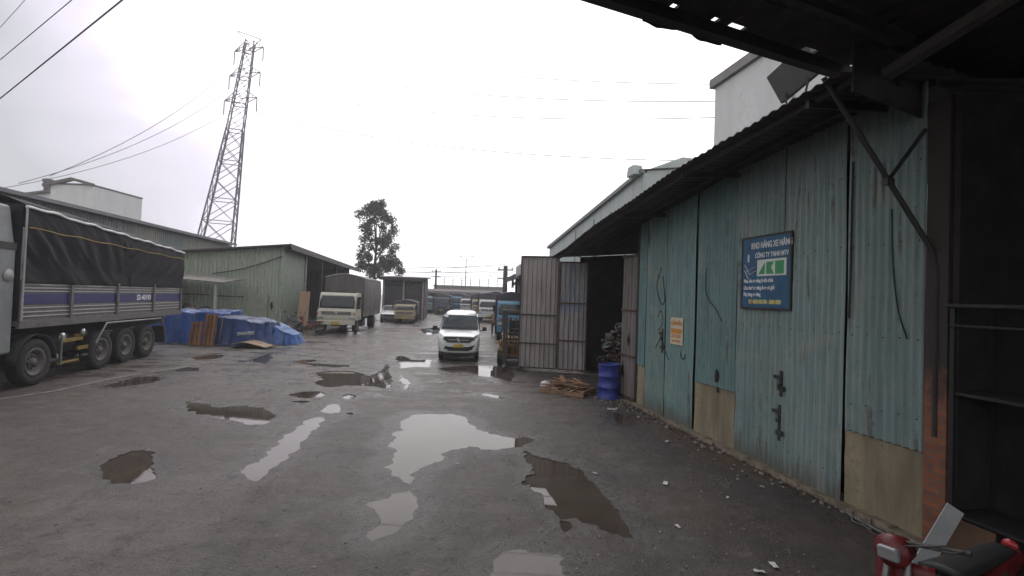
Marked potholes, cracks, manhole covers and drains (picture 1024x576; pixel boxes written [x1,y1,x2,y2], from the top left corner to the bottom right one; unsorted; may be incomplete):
pothole [100,450,157,484]
pothole [521,451,633,538]
pothole [315,365,393,389]
